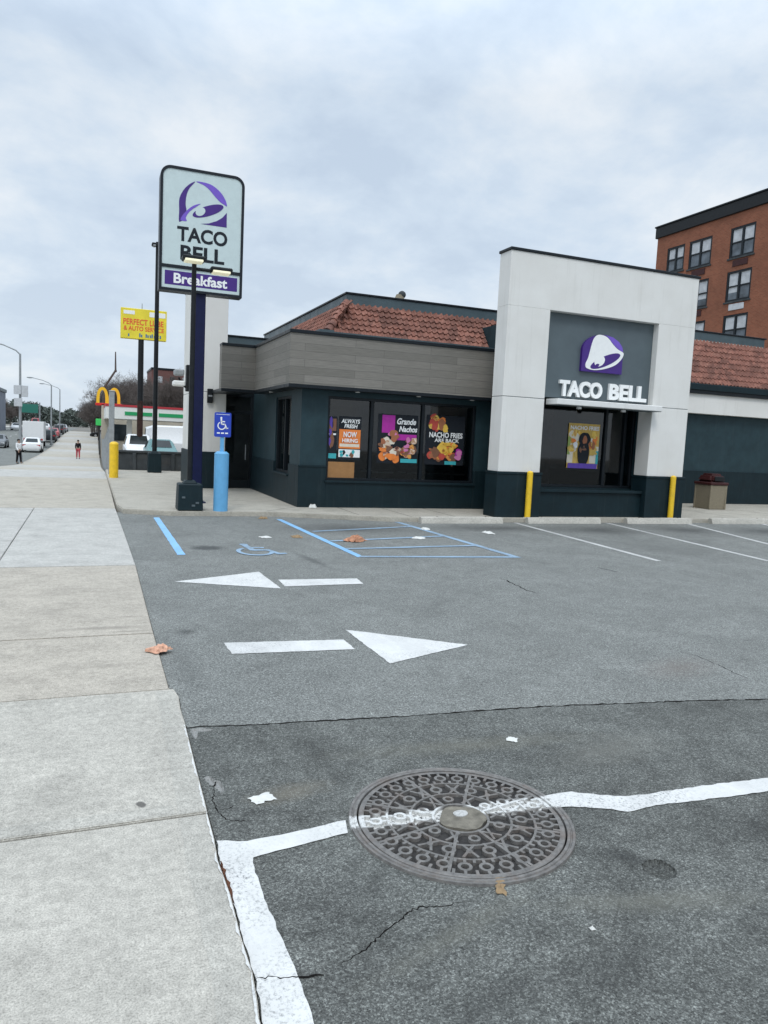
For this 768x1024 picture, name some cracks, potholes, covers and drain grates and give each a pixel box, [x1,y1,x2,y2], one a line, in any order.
manhole cover [348,768,576,887]
pothole [642,859,677,880]
crack [254,902,462,985]
crack [210,782,253,822]
